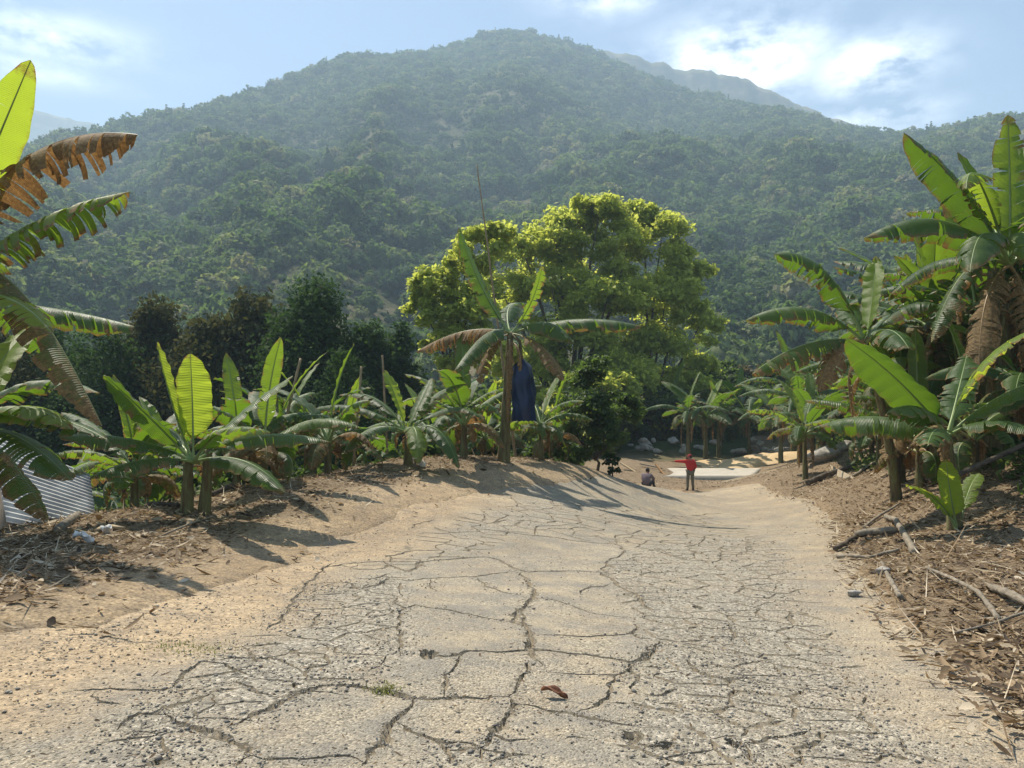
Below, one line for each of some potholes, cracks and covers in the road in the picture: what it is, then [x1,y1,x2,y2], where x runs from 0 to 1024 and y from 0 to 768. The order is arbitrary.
crack [65,496,948,767]
